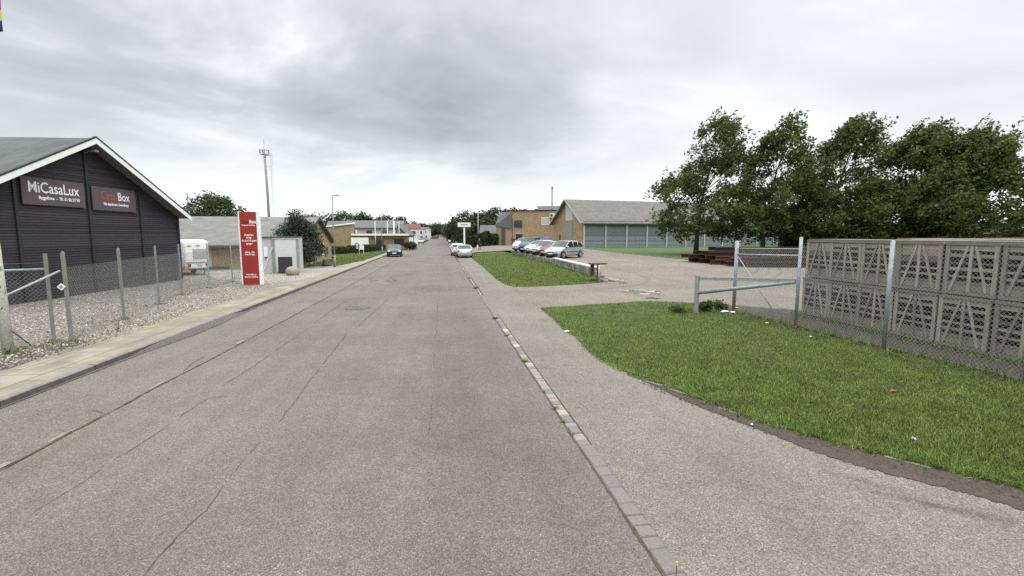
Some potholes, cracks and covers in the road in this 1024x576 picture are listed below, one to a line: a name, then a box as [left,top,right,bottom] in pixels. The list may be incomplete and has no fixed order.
crack [143,304,383,576]
crack [29,301,345,516]
